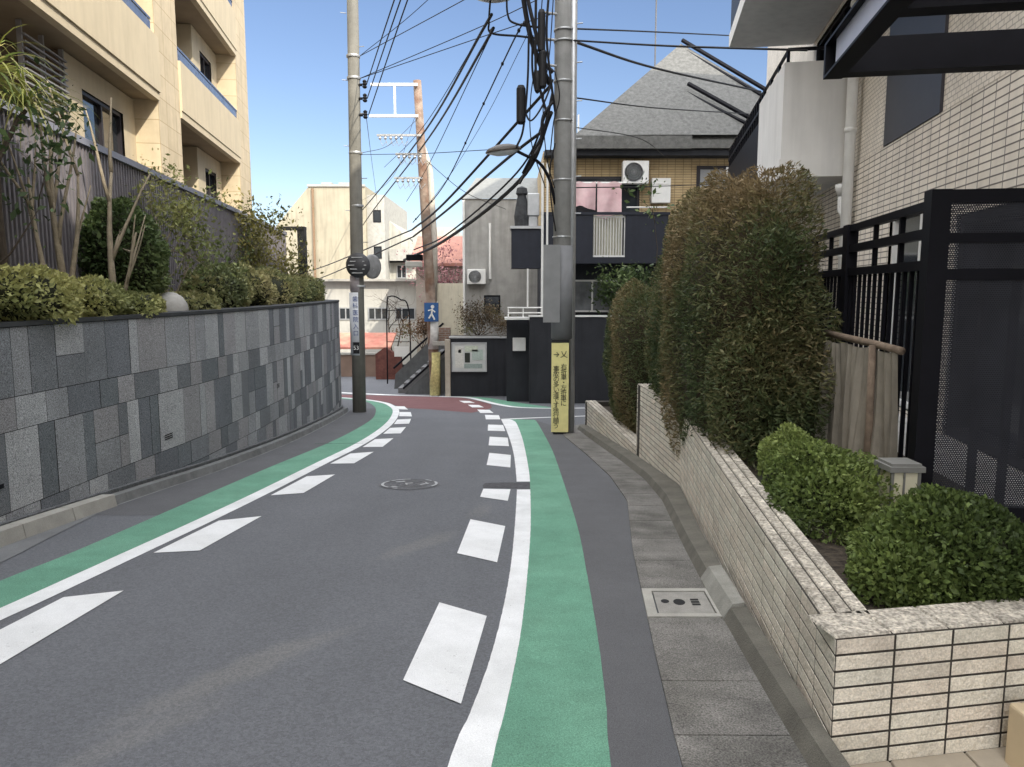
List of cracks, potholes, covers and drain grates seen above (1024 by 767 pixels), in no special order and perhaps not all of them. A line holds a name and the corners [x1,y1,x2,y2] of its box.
manhole cover [379,479,440,490]
utility cover [641,588,722,619]
